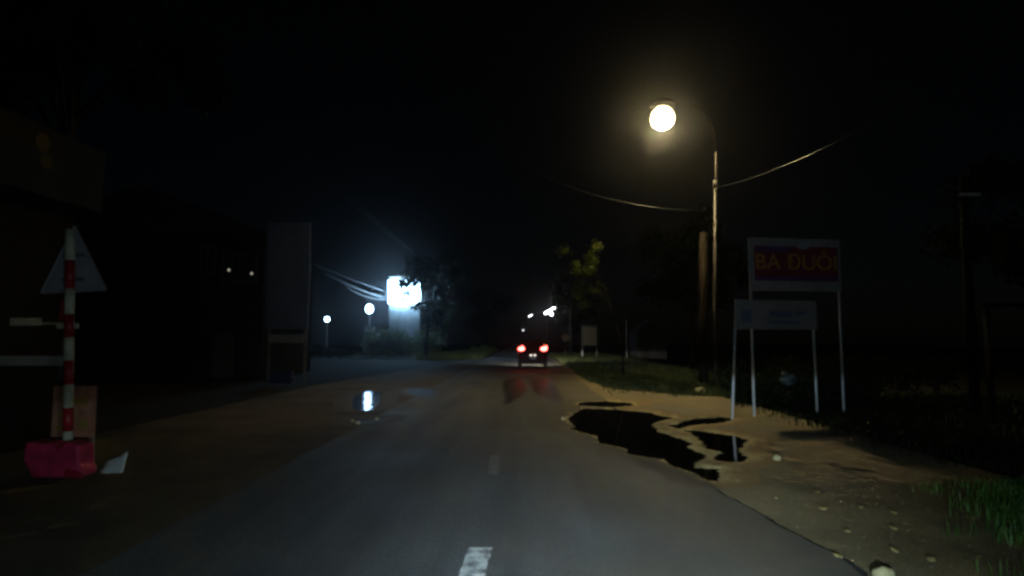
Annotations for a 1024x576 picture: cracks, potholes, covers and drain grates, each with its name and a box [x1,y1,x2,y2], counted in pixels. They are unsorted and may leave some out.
pothole [561,399,654,408]
pothole [547,406,762,488]
pothole [671,427,783,467]
